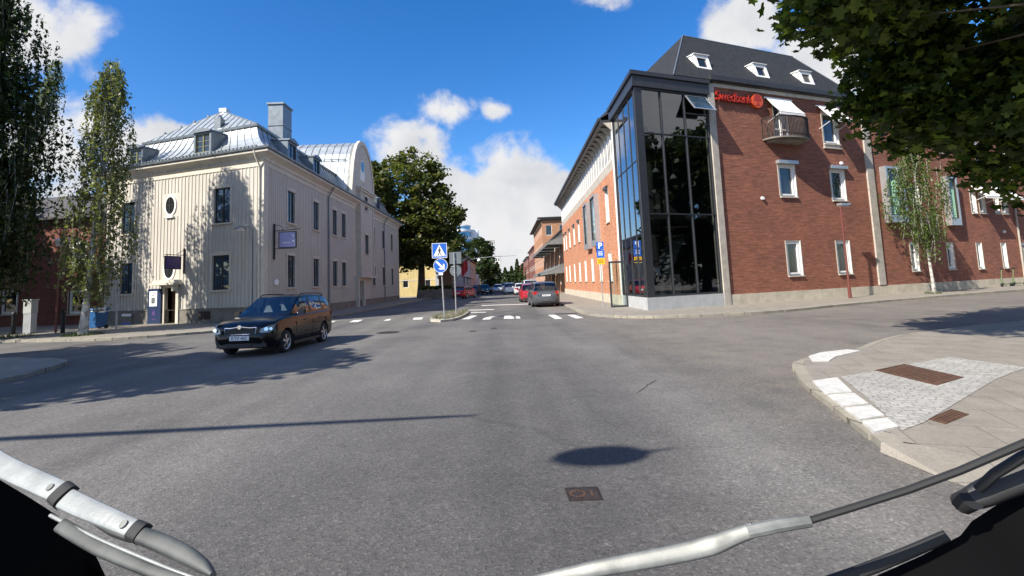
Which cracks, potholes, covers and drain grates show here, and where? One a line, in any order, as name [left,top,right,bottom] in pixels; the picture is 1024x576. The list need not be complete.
manhole cover [564,486,602,502]
